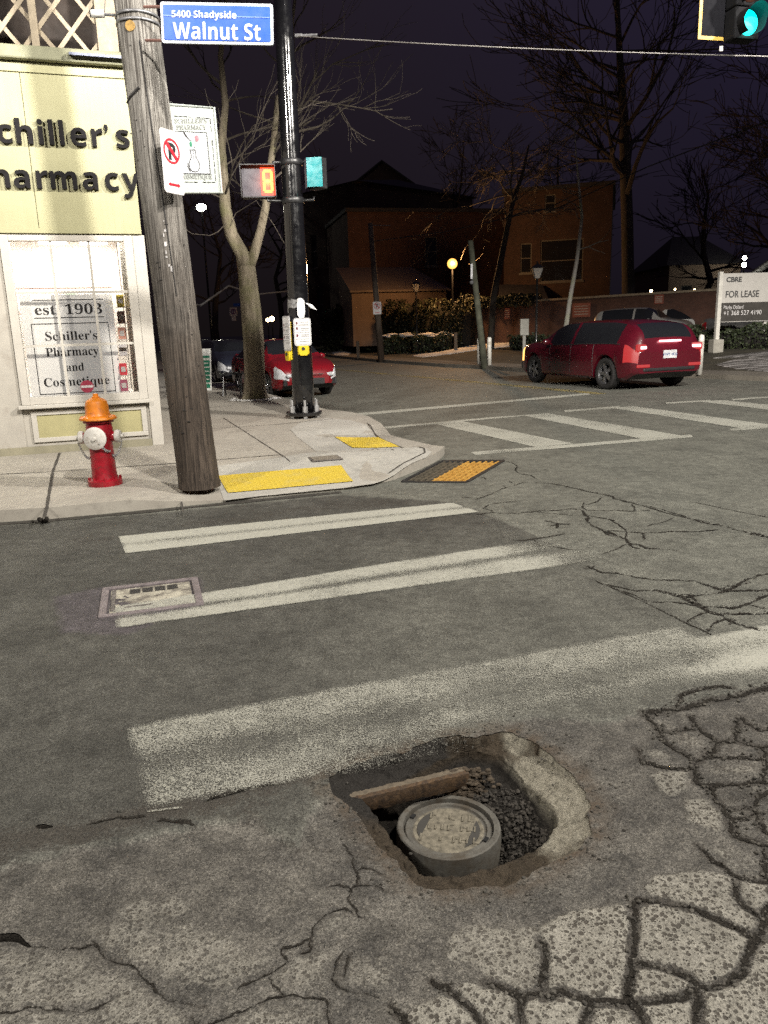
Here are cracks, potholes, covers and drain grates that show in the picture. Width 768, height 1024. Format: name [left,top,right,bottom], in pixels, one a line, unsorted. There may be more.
crack [461,461,768,634]
crack [0,844,393,1024]
drain grate [401,460,505,483]
crack [388,682,768,1024]
crack [89,782,284,826]
manhole cover [396,795,501,877]
manhole cover [98,577,204,619]
pothole [287,713,633,928]
